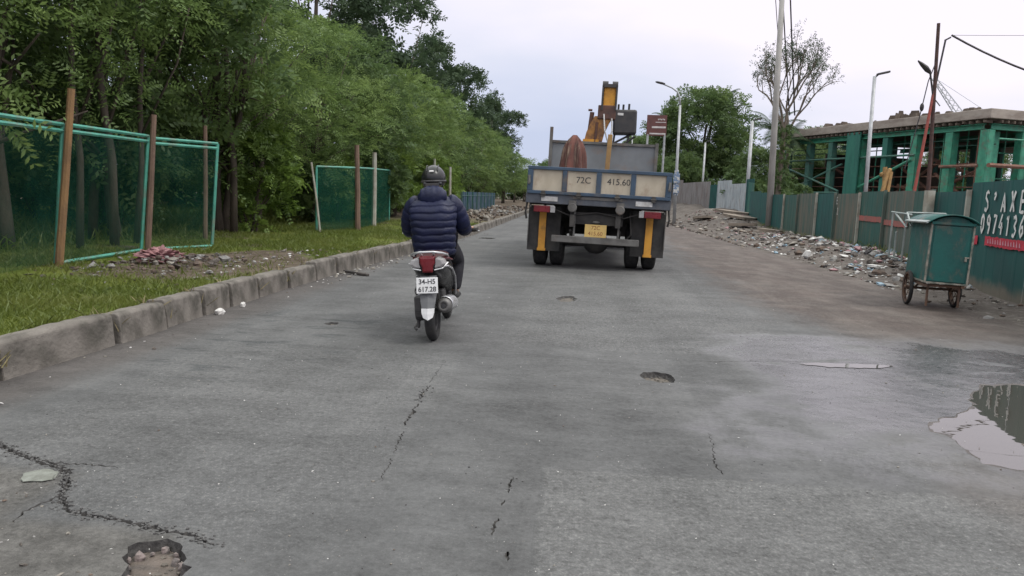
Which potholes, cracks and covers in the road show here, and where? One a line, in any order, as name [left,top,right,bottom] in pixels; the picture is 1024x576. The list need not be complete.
crack [490,478,524,561]
crack [0,441,225,549]
pothole [121,539,192,576]
crack [381,365,442,479]
pothole [640,372,675,383]
